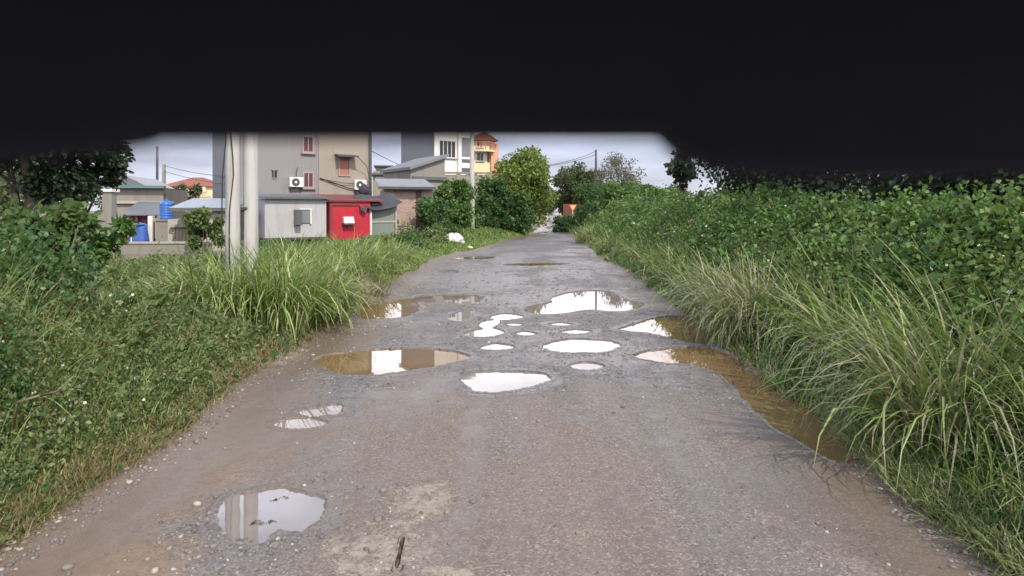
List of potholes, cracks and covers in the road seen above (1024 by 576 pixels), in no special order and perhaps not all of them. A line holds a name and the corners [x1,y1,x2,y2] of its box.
pothole [485,312,528,321]
pothole [205,482,336,551]
pothole [475,319,503,329]
pothole [628,345,748,376]
pothole [409,294,489,304]
pothole [351,298,424,320]
pothole [520,290,651,315]
pothole [564,360,610,371]
pothole [476,342,521,351]
pothole [264,415,335,432]
pothole [615,315,717,345]
